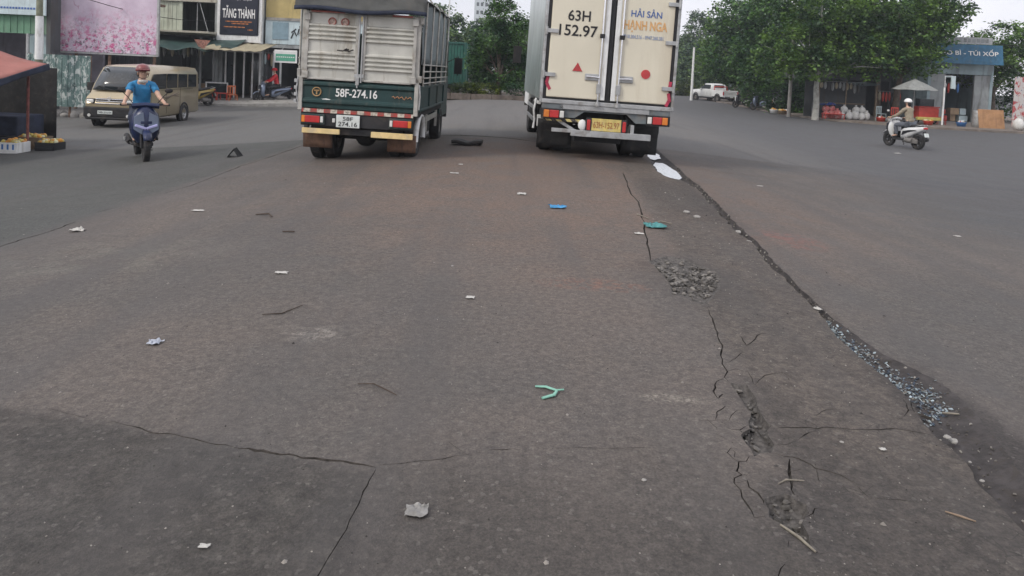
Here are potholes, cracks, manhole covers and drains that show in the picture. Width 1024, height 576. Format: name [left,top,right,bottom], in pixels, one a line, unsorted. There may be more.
crack [701,309,981,576]
pothole [649,256,722,305]
crack [623,174,651,261]
crack [383,442,656,465]
